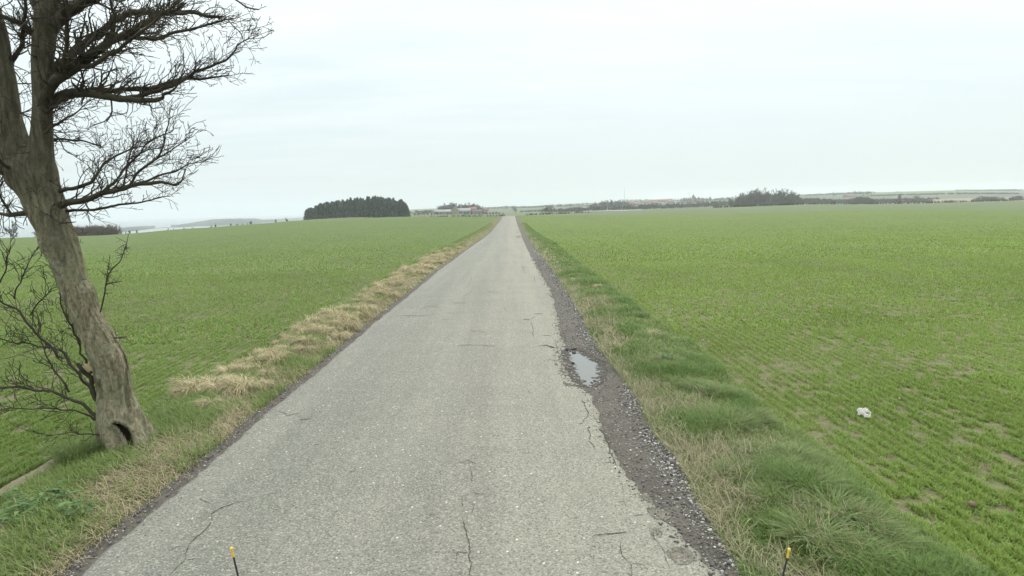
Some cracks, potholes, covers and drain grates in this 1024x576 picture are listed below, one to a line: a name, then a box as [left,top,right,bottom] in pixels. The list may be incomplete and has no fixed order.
crack [456,459,478,575]
pothole [561,348,608,387]
crack [528,313,615,463]
crack [171,498,242,574]
crack [593,482,671,575]
